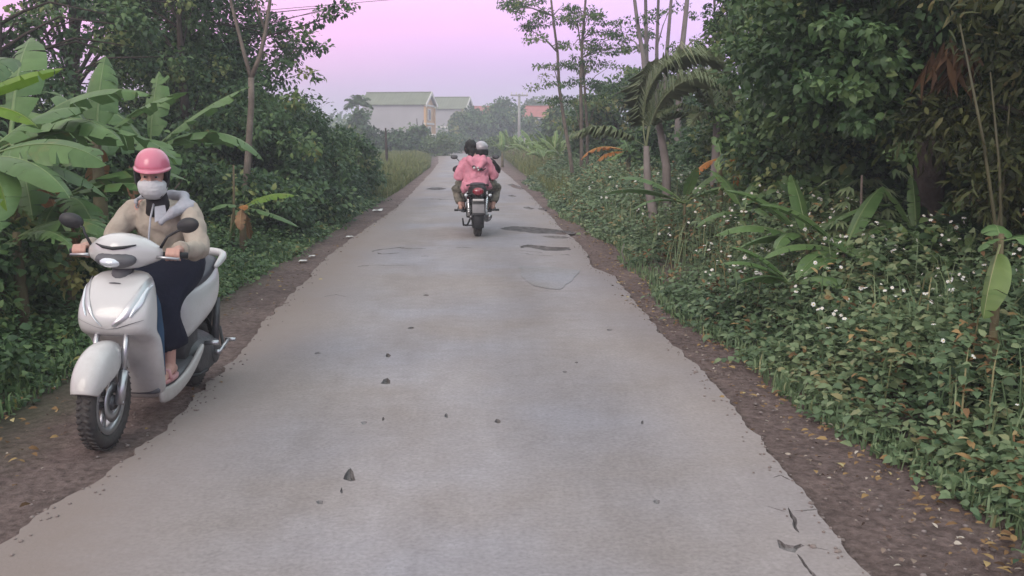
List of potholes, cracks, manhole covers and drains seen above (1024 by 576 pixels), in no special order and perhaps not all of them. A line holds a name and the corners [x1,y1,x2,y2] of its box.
crack [768,506,827,576]
pothole [502,226,575,235]
